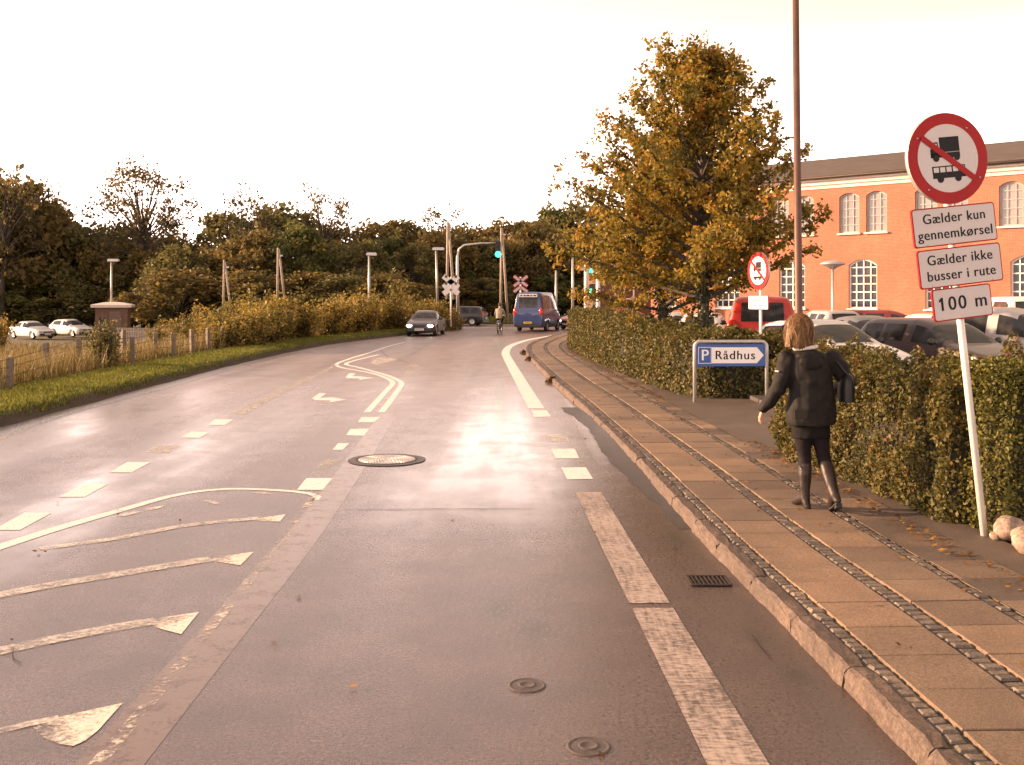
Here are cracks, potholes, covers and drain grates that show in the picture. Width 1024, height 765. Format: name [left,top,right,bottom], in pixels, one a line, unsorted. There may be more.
utility cover [508,678,546,693]
manhole cover [348,454,426,466]
drain grate [685,575,733,586]
utility cover [566,736,611,757]
